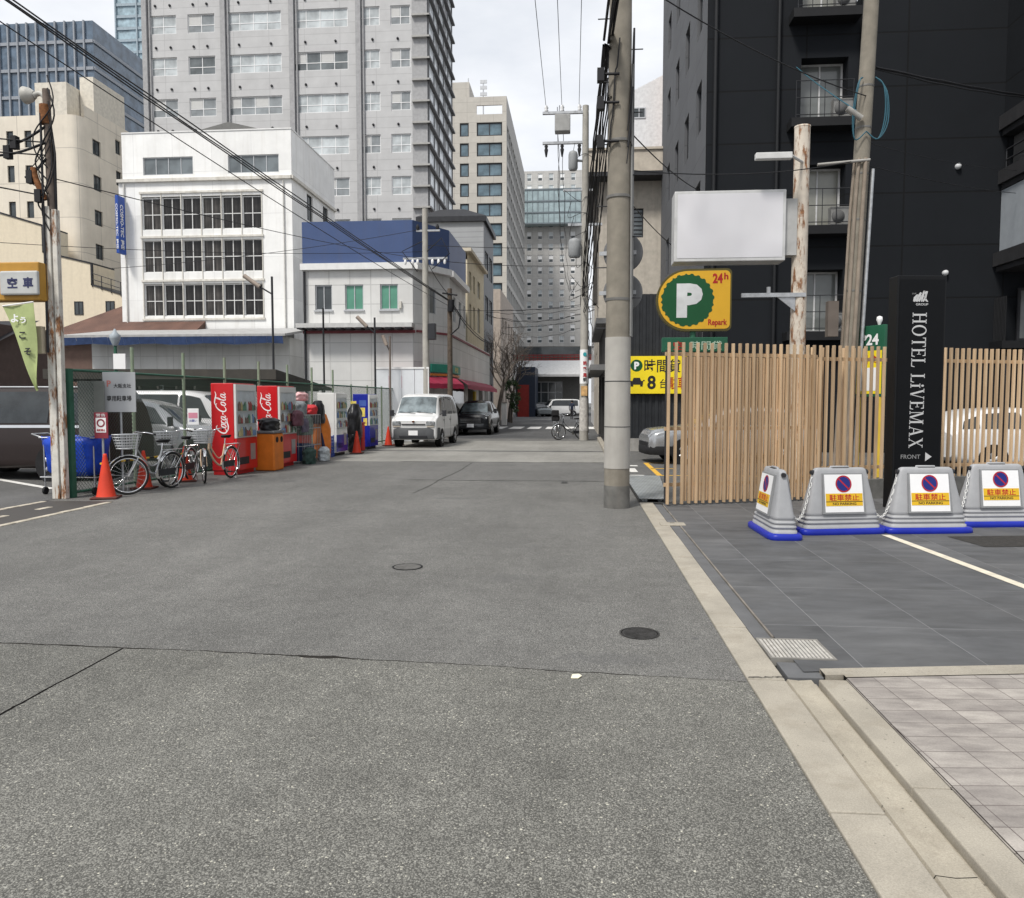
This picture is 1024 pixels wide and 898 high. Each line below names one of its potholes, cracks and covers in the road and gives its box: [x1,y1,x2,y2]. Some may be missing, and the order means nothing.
drain grate [756,638,838,666]
crack [403,451,604,493]
crack [0,642,745,715]
manhole cover [619,627,660,639]
